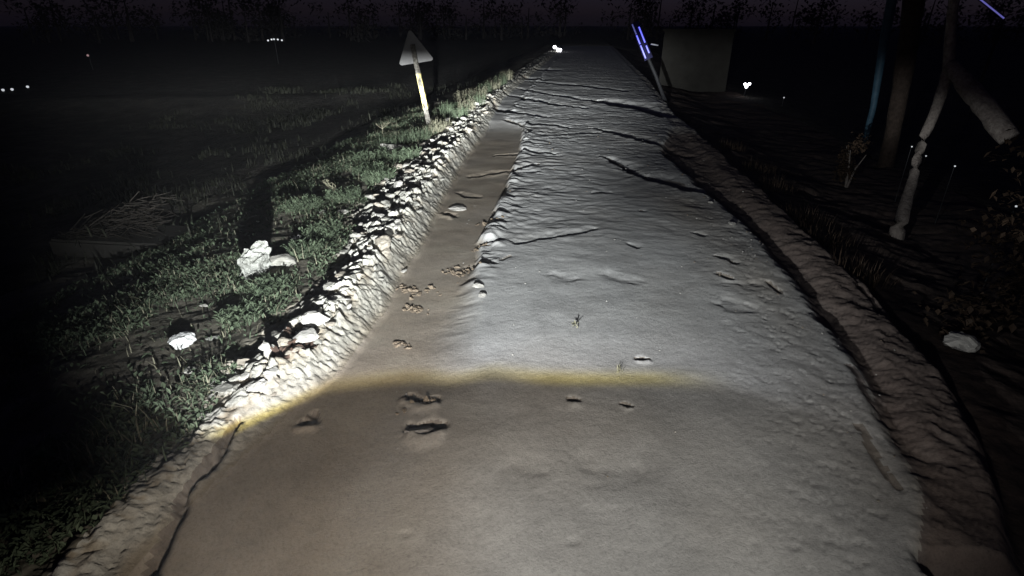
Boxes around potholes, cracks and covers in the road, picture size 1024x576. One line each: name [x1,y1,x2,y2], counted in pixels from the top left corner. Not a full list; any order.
pothole [404,393,441,404]
pothole [406,419,448,431]
crack [490,68,606,128]
crack [140,415,241,576]
crack [484,227,598,264]
